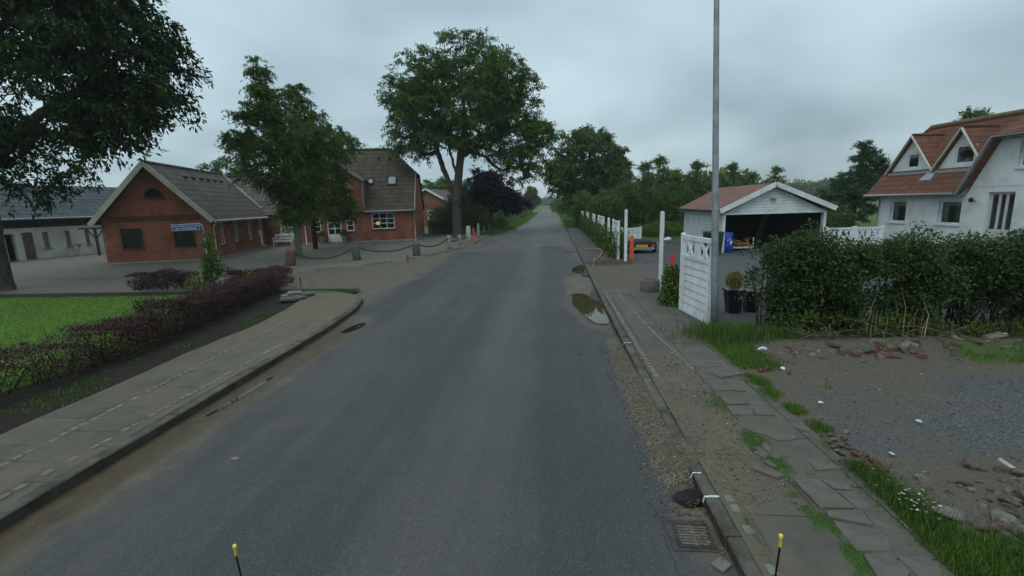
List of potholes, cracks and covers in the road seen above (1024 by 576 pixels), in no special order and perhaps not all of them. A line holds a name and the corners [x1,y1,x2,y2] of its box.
pothole [673,489,701,505]
drain grate [671,522,717,550]
